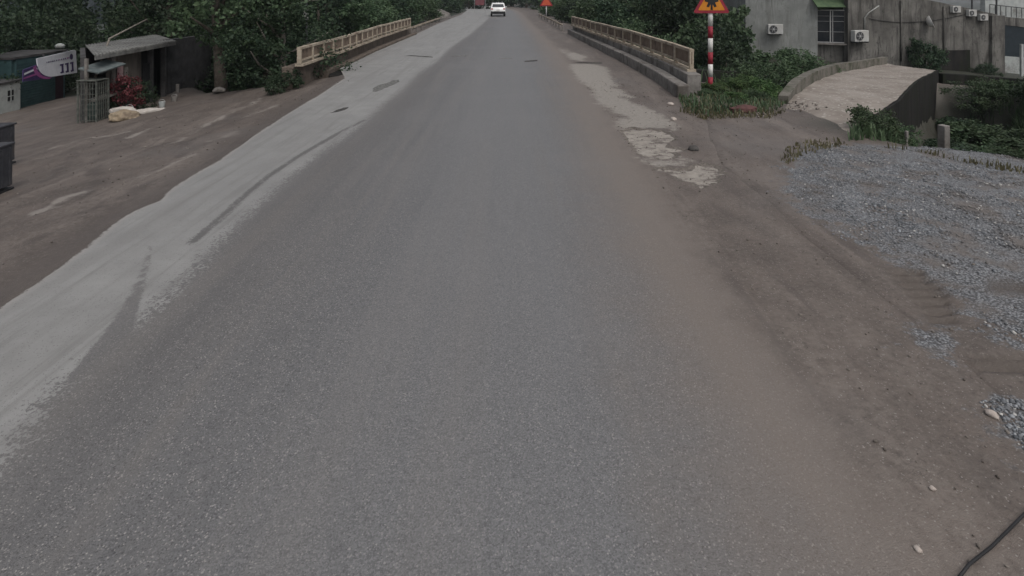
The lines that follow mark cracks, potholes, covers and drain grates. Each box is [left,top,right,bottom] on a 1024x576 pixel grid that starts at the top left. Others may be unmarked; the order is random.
pothole [373,80,400,92]
